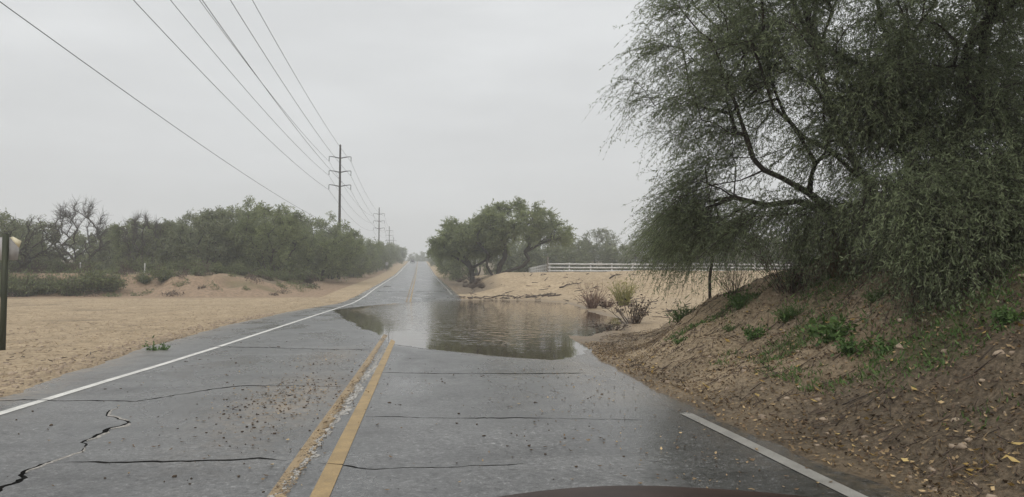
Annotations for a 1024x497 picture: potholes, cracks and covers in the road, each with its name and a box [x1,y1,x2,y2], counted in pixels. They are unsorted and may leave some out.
crack [0,347,628,497]
